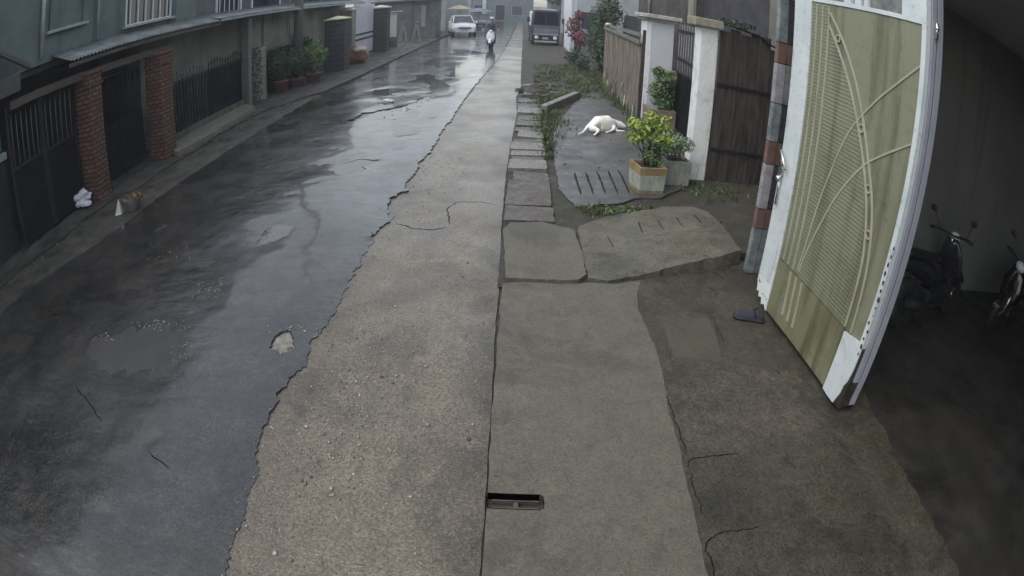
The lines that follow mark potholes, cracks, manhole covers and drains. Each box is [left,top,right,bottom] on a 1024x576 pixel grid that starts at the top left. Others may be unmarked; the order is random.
pothole [269,330,295,354]
crack [399,202,494,230]
crack [667,397,769,576]
